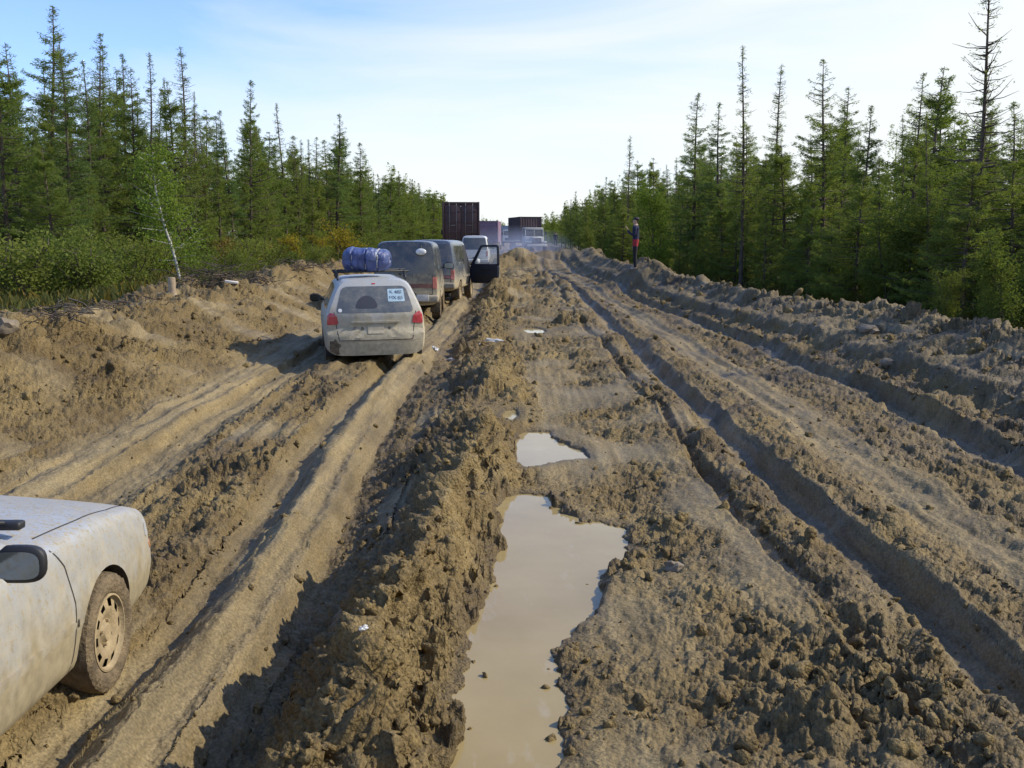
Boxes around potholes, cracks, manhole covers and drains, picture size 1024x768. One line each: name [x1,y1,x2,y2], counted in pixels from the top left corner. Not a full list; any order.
pothole [432,478,638,768]
pothole [507,422,594,468]
